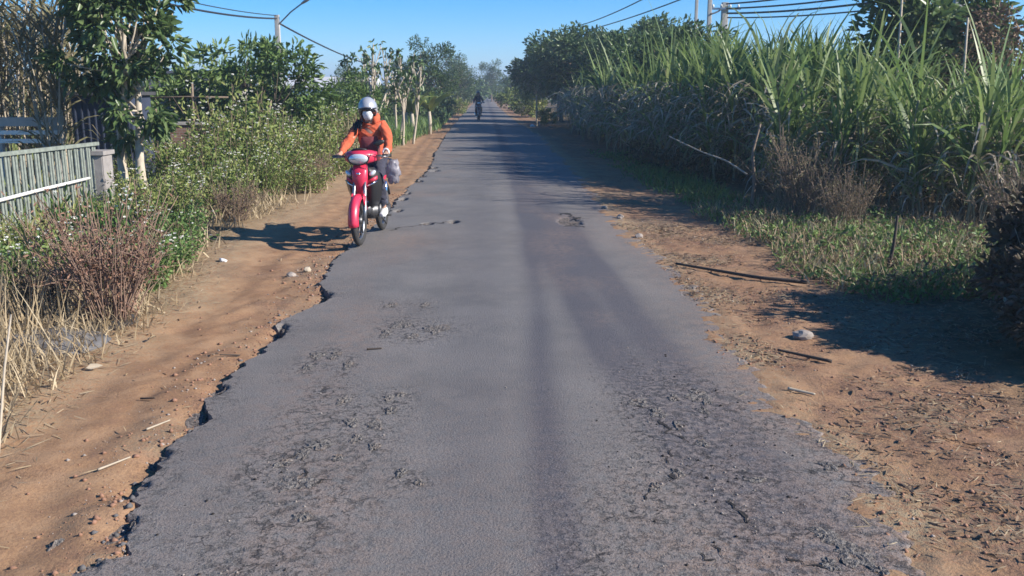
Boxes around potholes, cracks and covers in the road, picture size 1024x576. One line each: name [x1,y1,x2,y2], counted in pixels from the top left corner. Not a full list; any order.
pothole [305,438,333,451]
pothole [684,389,712,401]
crack [637,403,703,479]
crack [786,556,826,568]
pothole [185,407,209,428]
pothole [422,324,450,336]
pothole [628,398,649,408]
pothole [651,407,668,418]
pothole [364,418,382,430]
pothole [390,320,412,329]
crack [727,499,748,522]
pothole [343,418,359,428]
